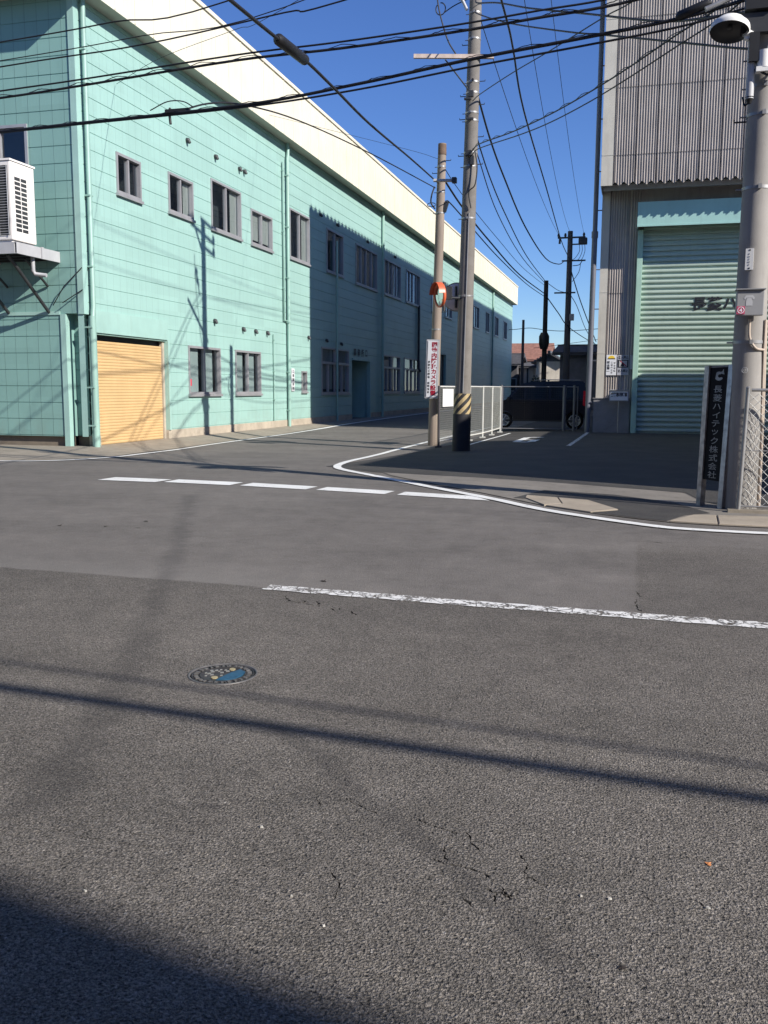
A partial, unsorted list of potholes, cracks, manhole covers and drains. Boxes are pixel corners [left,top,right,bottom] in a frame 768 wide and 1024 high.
crack [326,872,340,908]
manhole cover [188,663,258,685]
crack [416,818,550,920]
